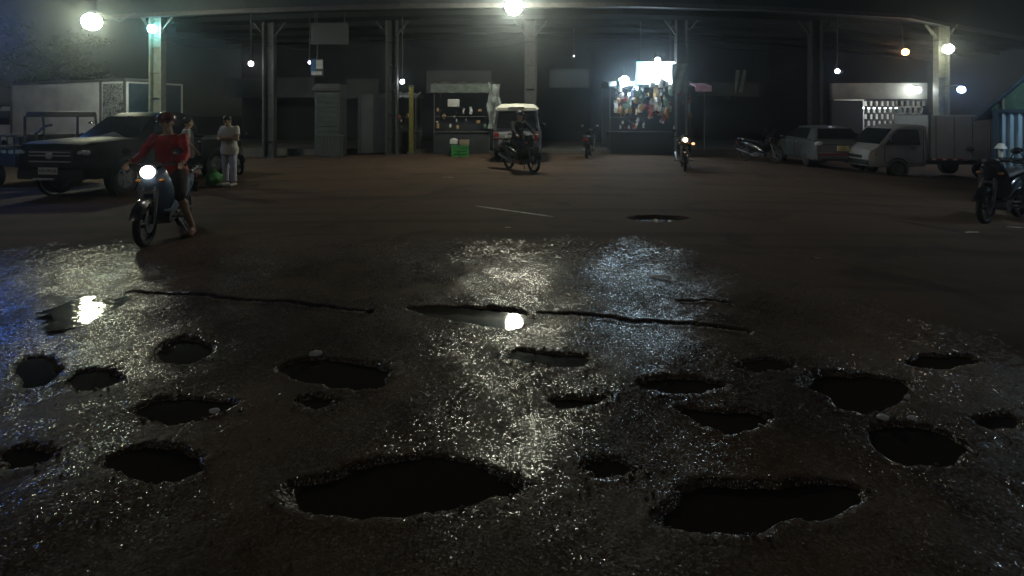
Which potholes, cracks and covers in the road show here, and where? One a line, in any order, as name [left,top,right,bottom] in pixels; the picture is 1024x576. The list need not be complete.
pothole [118,390,255,433]
pothole [400,301,543,335]
pothole [891,349,992,375]
pothole [0,435,73,481]
pothole [781,365,926,420]
crack [123,288,375,316]
crack [535,297,750,337]
pothole [540,388,622,416]
pothole [566,447,646,487]
pothole [50,362,134,399]
pothole [493,344,603,374]
pothole [667,400,791,443]
